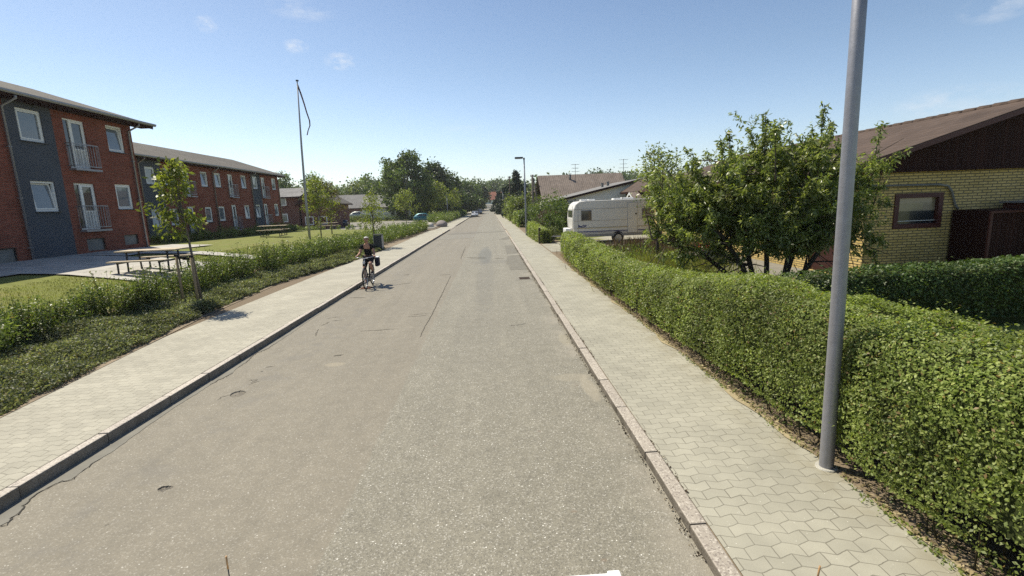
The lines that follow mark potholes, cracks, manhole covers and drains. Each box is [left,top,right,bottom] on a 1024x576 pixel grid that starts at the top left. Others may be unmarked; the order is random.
crack [366,247,480,334]
crack [1,458,101,526]
